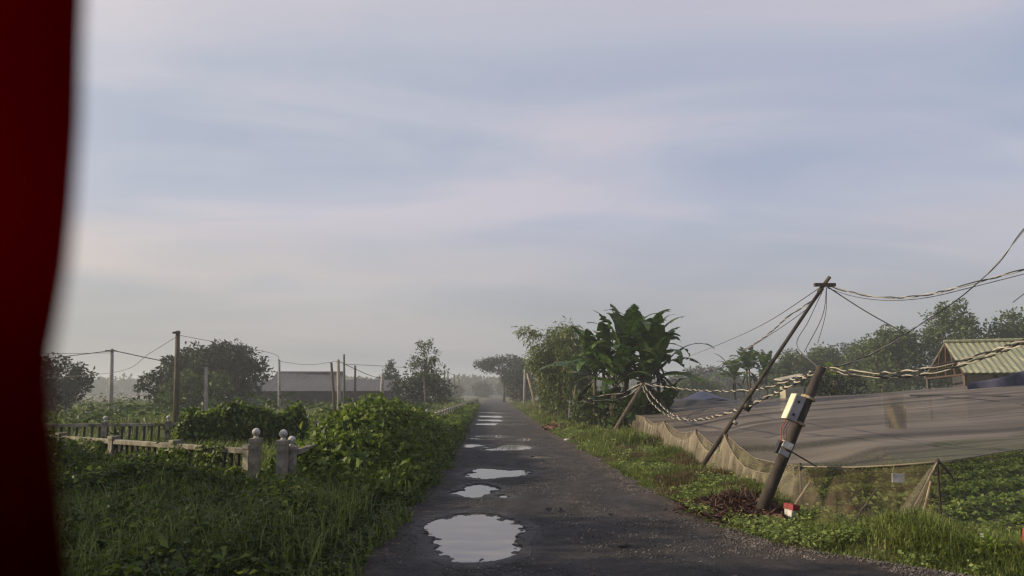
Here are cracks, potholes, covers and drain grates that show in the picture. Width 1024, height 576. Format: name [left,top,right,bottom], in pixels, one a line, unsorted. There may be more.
pothole [453,467,546,480]
pothole [405,509,543,570]
pothole [472,443,541,451]
pothole [438,482,511,500]
